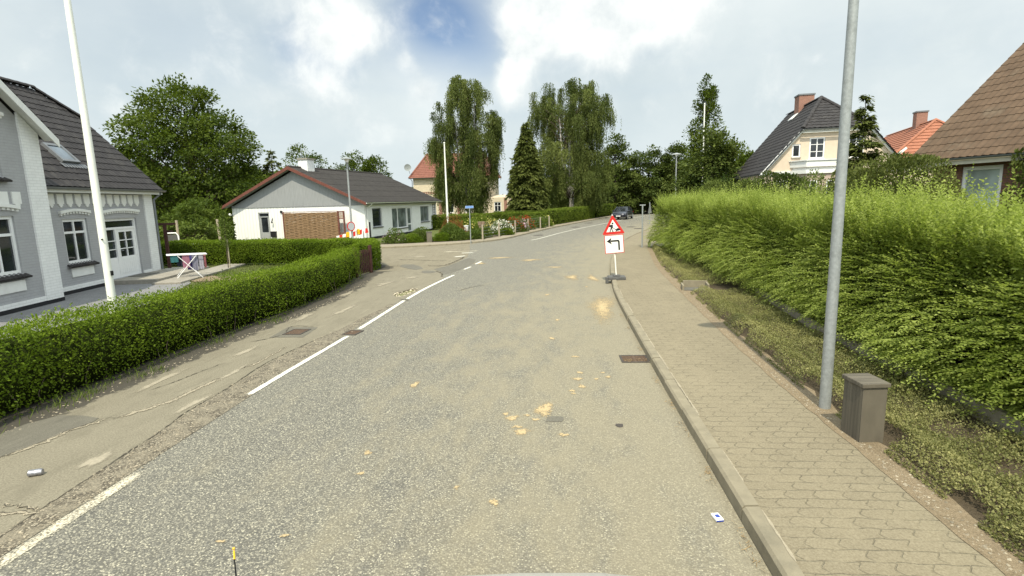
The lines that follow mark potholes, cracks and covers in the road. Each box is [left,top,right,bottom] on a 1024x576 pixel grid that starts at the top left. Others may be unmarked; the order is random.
drain grate [619,355,650,363]
